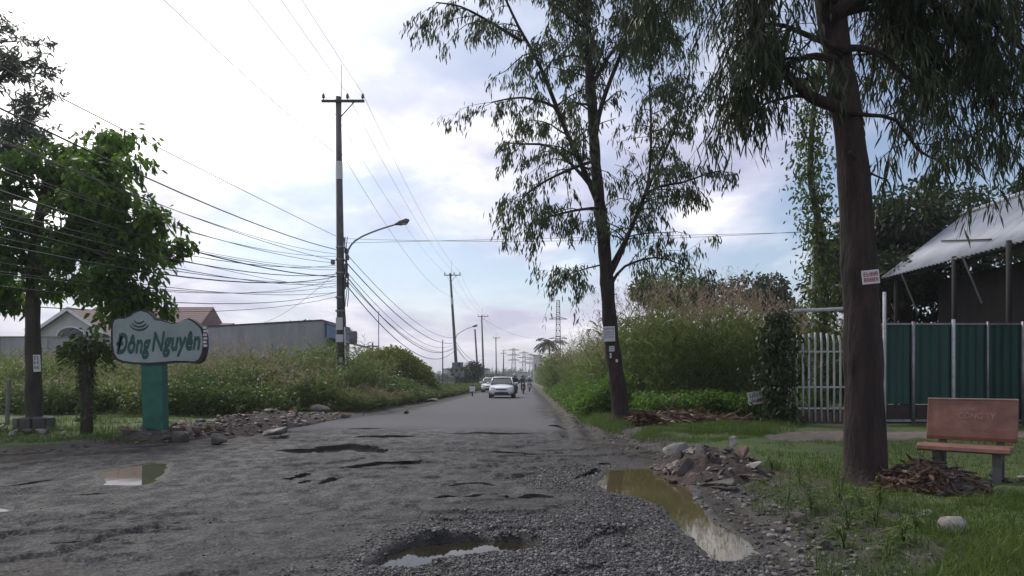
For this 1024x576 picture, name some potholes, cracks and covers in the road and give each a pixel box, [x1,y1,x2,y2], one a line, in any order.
pothole [589,466,768,562]
pothole [91,461,174,486]
pothole [363,529,554,568]
